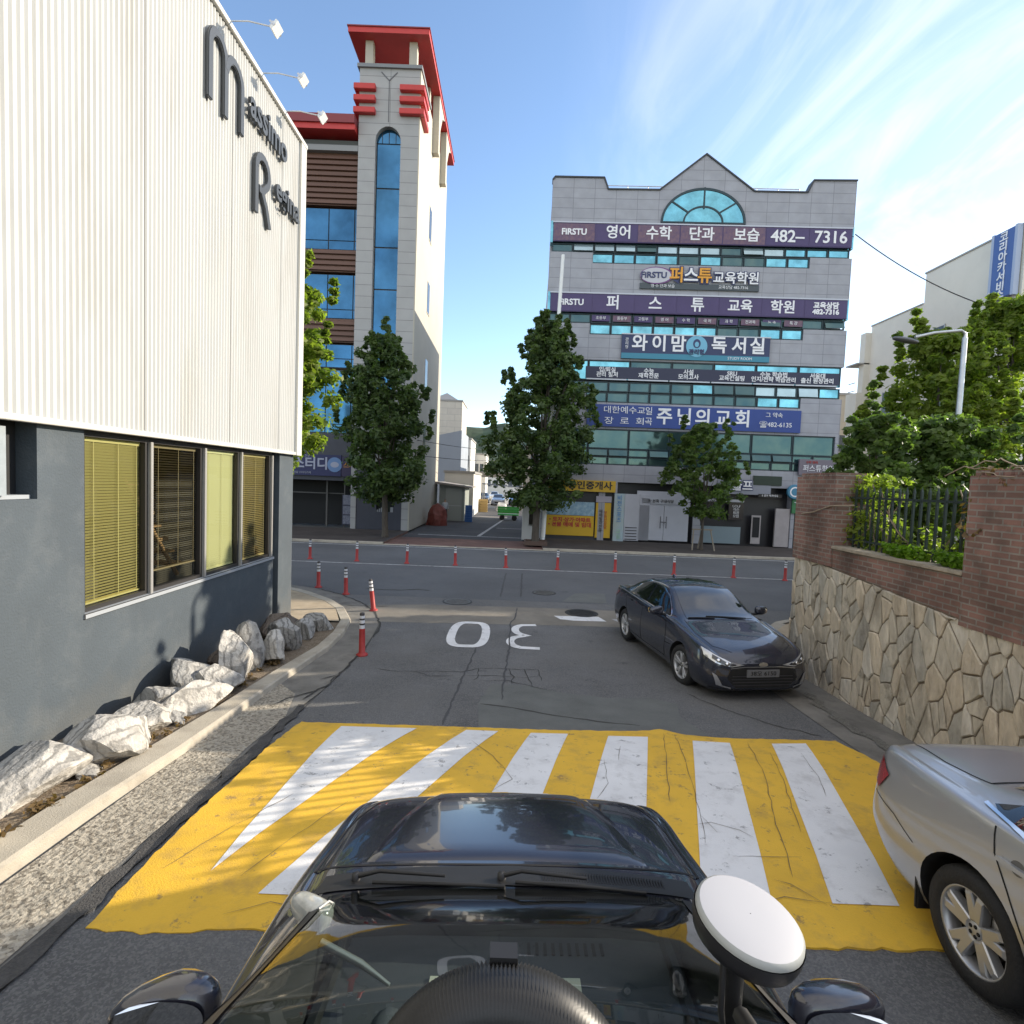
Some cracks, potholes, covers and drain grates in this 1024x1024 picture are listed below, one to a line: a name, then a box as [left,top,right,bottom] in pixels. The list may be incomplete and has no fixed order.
crack [663,734,749,835]
crack [687,693,820,736]
crack [751,749,827,905]
manhole cover [565,609,598,617]
